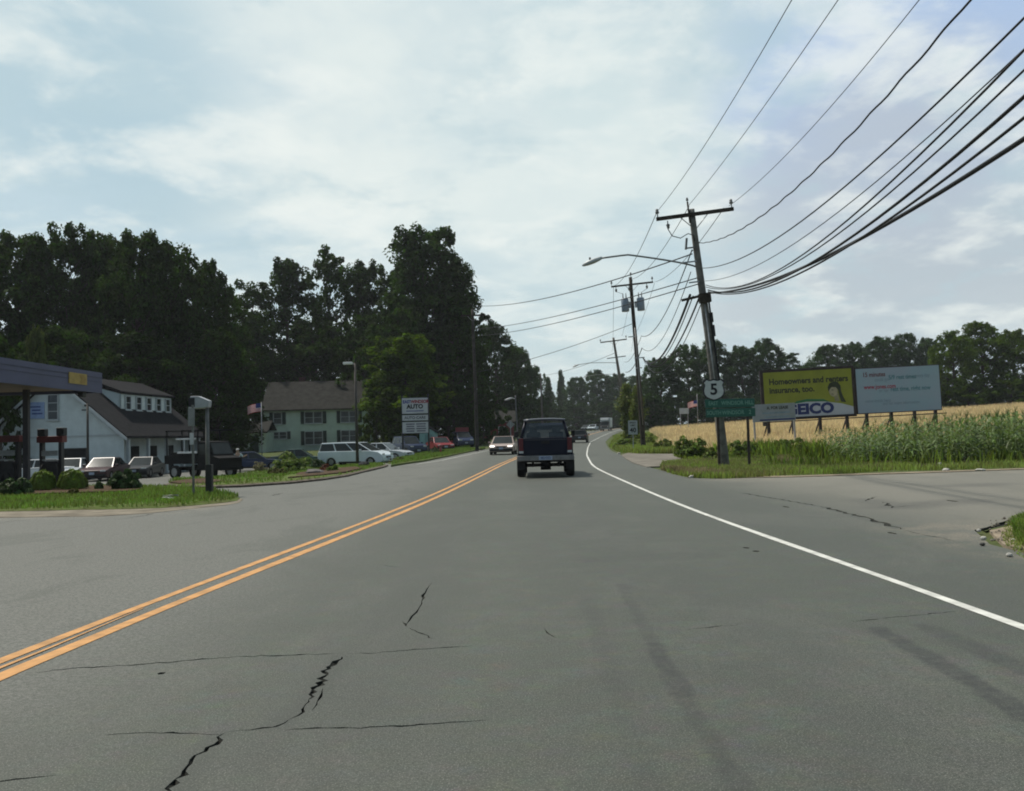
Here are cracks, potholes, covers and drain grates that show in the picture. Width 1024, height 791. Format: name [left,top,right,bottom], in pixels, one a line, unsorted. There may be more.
crack [403,588,429,638]
crack [95,647,451,791]
crack [749,494,933,537]
